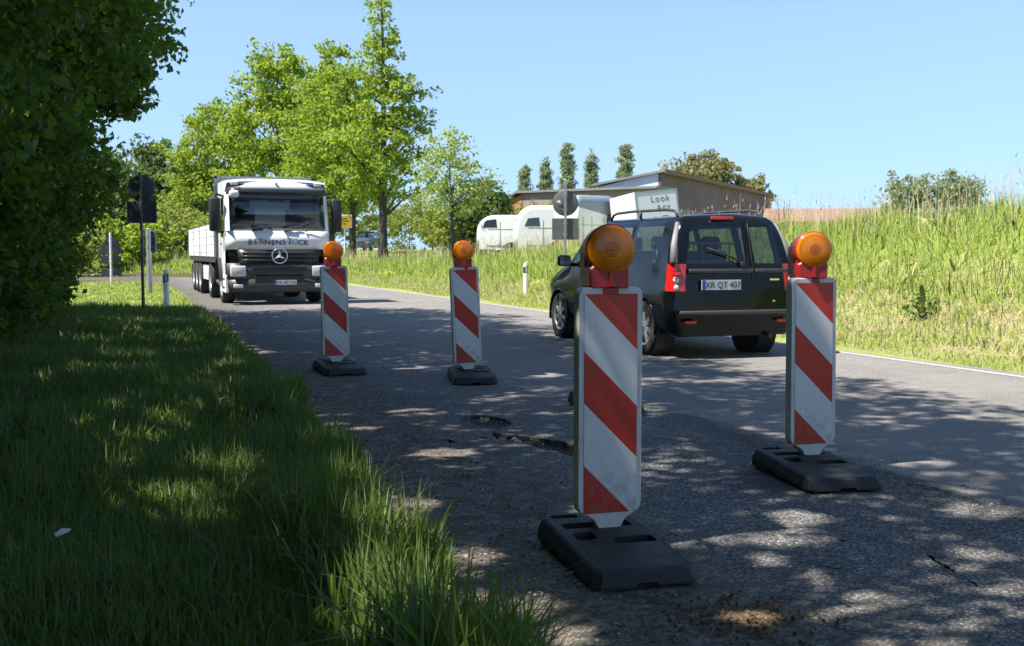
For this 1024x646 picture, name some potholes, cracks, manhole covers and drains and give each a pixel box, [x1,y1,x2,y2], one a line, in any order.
pothole [516,437,573,457]
crack [926,553,985,591]
pothole [460,415,511,429]
